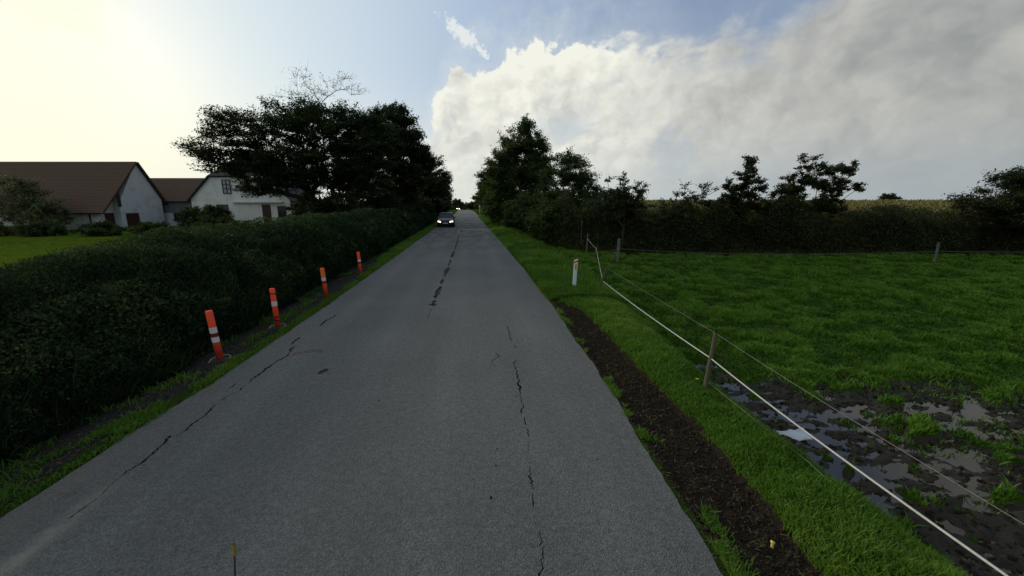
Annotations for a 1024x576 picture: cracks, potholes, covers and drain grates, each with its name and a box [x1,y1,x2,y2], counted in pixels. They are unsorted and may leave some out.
crack [31,315,335,534]
crack [492,326,544,576]
